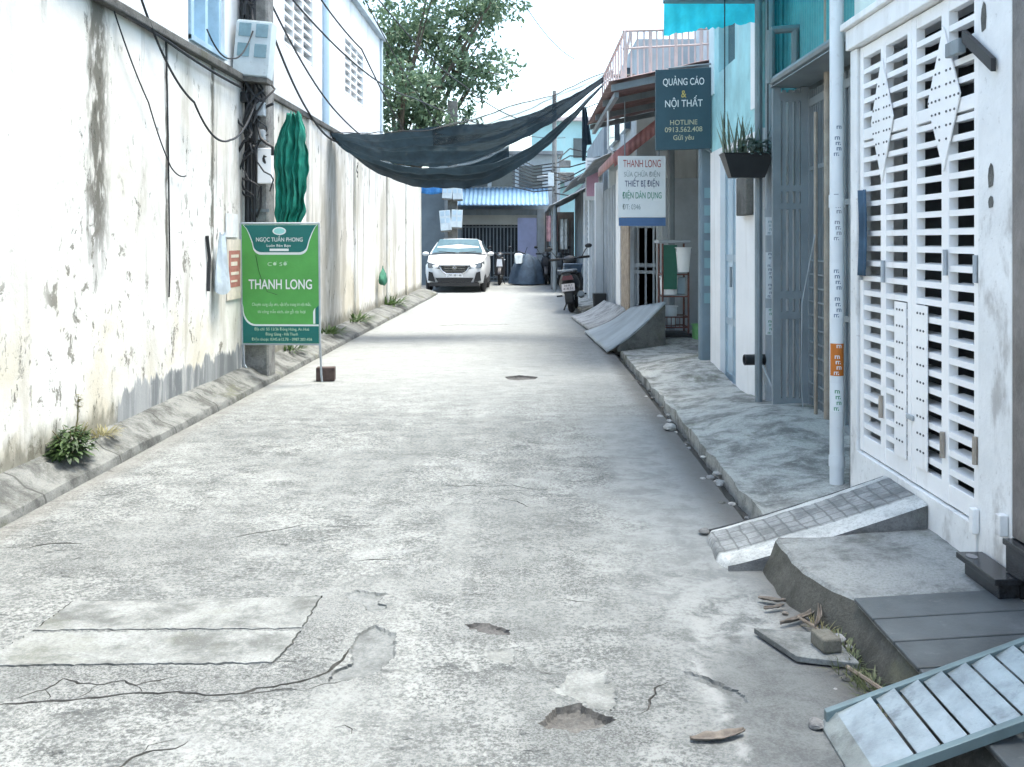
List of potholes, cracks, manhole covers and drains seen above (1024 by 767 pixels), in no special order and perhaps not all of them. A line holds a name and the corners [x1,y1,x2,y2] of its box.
pothole [465,623,510,635]
crack [0,648,350,705]
crack [640,682,668,714]
crack [120,738,188,767]
pothole [344,590,388,611]
crack [446,485,536,506]
pothole [537,703,616,733]
pothole [328,625,398,682]
